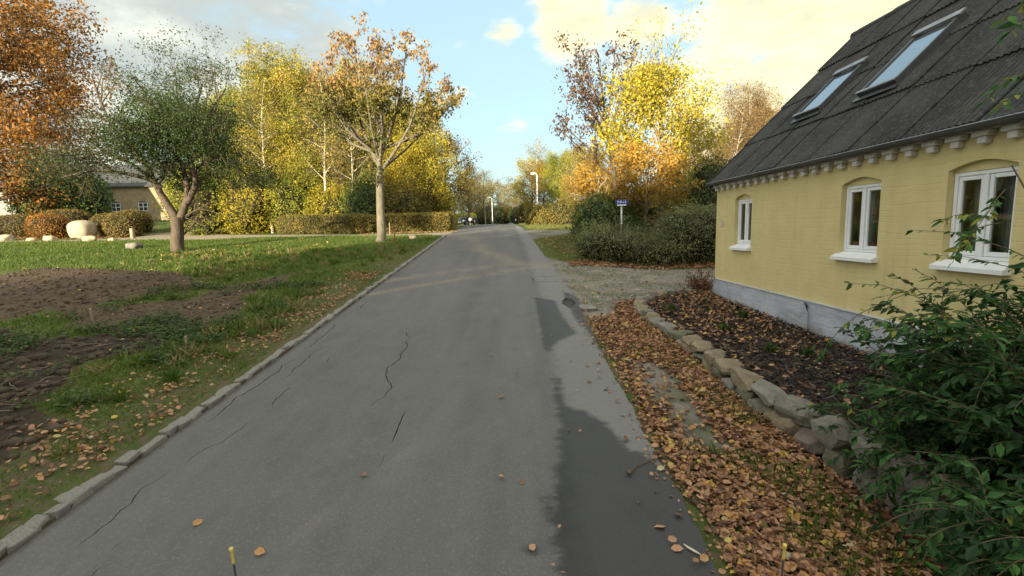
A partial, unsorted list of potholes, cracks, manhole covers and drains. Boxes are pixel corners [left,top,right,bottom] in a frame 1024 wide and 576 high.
crack [74,475,164,550]
crack [192,324,335,458]
crack [372,333,413,467]
